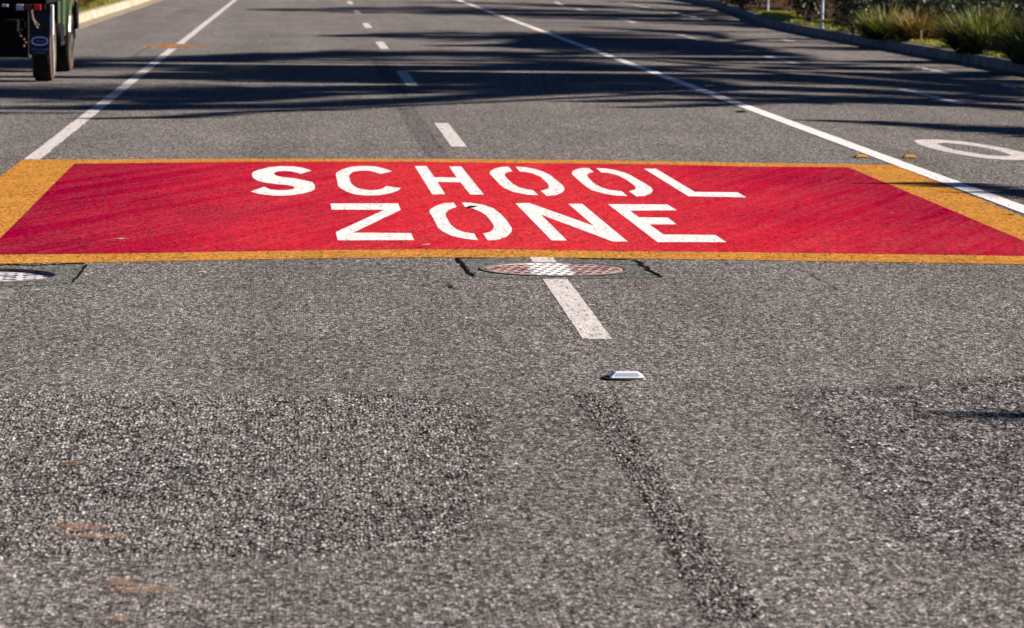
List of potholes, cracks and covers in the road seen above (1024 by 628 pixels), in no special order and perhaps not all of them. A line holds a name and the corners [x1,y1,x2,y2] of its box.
crack [448,257,475,289]
manhole cover [0,268,61,283]
manhole cover [479,262,630,277]
crack [0,263,87,282]
crack [580,258,663,277]
